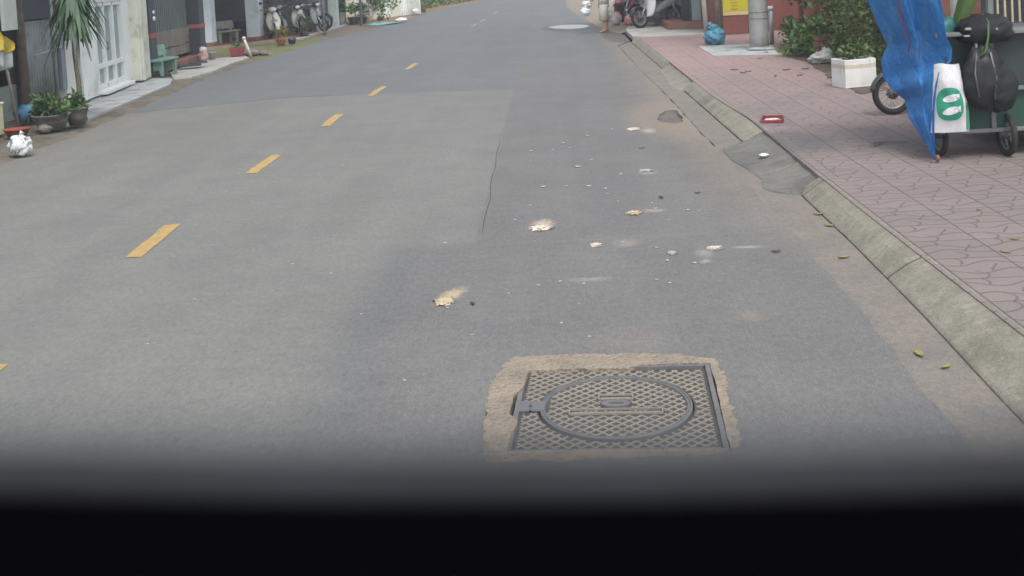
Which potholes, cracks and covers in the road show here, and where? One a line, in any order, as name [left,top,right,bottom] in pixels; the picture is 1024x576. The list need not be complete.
pothole [657,110,683,123]
manhole cover [483,353,740,437]
crack [482,134,501,232]
